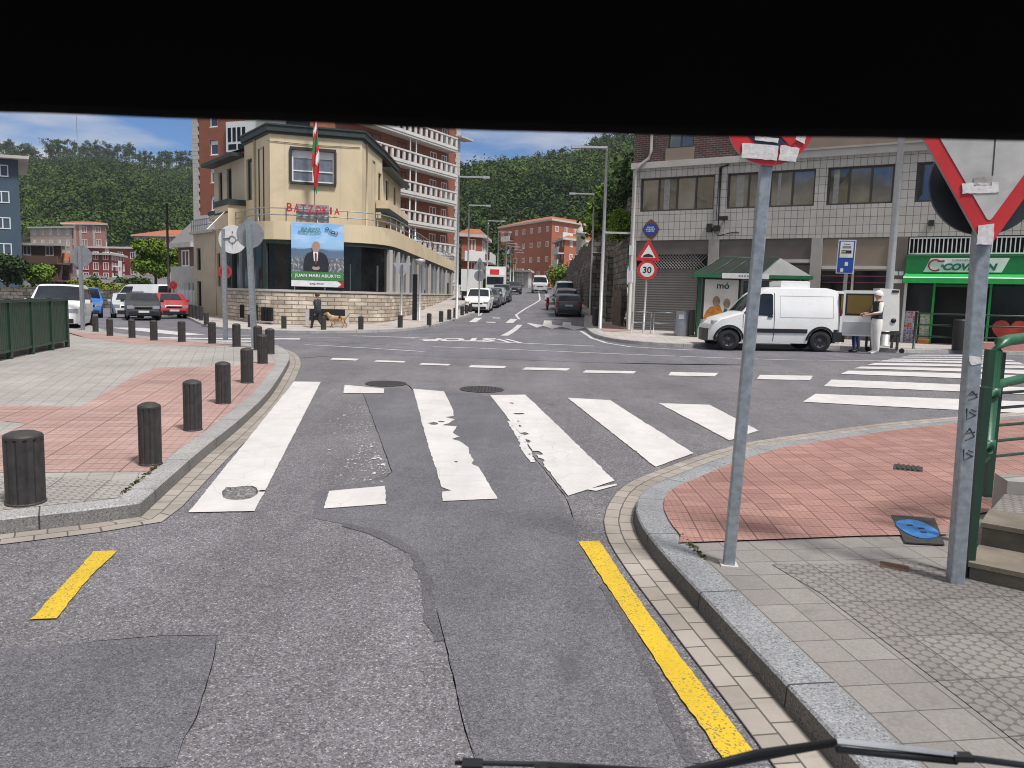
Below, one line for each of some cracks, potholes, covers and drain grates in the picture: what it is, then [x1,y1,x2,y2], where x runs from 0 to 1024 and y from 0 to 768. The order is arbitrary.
utility cover [891,515,945,545]
crack [533,456,574,519]
